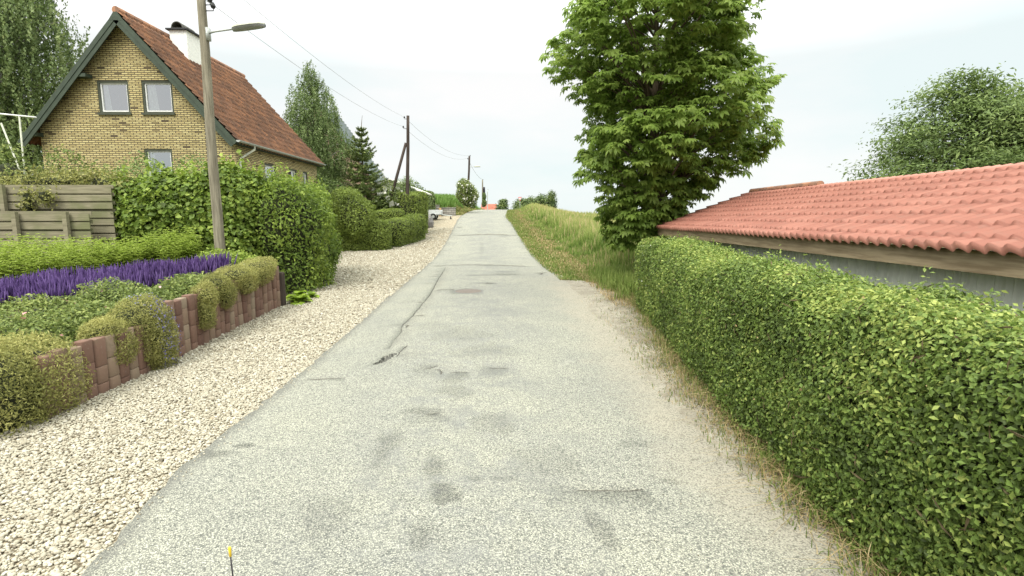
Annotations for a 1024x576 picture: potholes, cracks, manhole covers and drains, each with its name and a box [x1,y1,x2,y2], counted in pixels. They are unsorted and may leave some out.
crack [389,265,542,356]
